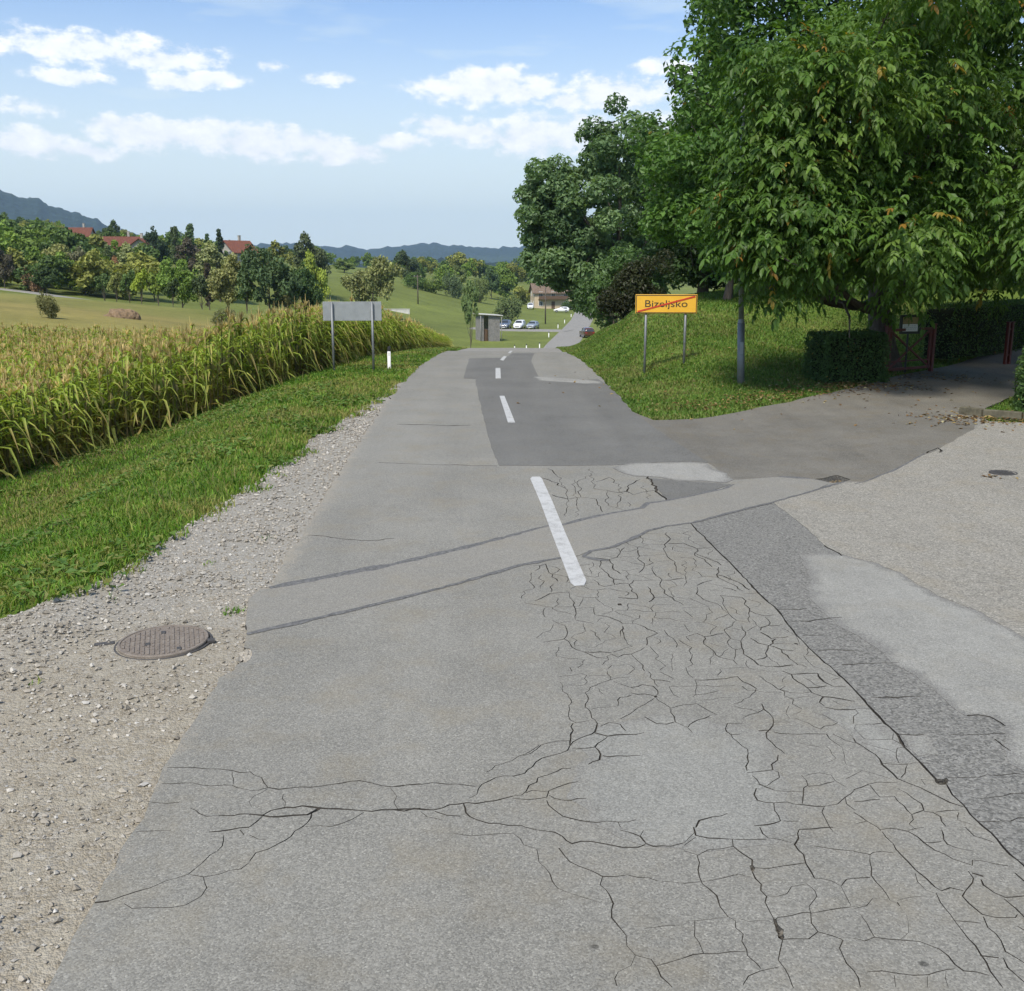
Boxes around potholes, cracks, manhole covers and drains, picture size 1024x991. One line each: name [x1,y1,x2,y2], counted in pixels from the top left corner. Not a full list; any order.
manhole cover [94,625,215,660]
